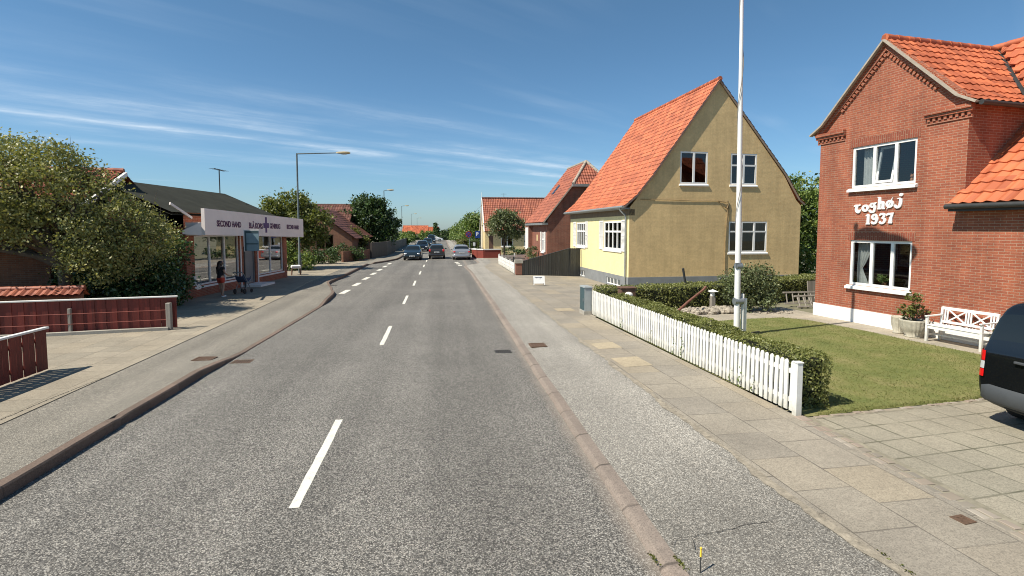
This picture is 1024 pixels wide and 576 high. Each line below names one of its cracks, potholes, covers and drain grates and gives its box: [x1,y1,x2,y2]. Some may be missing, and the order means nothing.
manhole cover [949,514,977,525]
